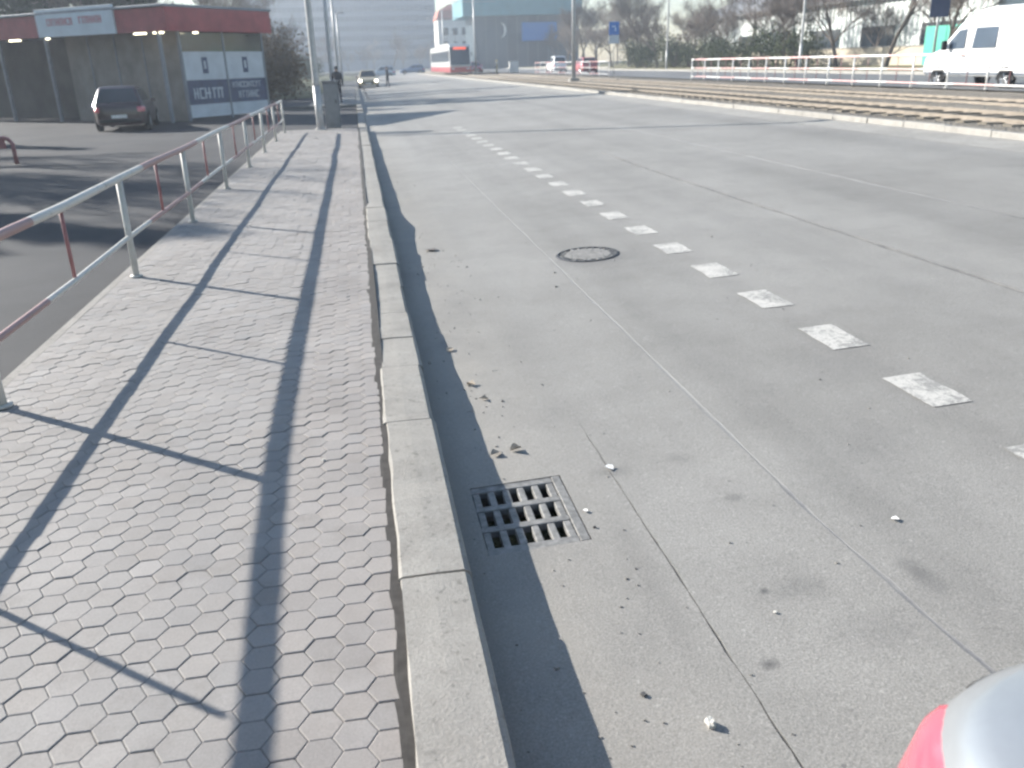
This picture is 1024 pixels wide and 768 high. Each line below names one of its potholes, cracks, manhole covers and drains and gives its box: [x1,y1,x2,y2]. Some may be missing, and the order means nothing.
manhole cover [556,247,620,262]
drain grate [470,475,592,556]
